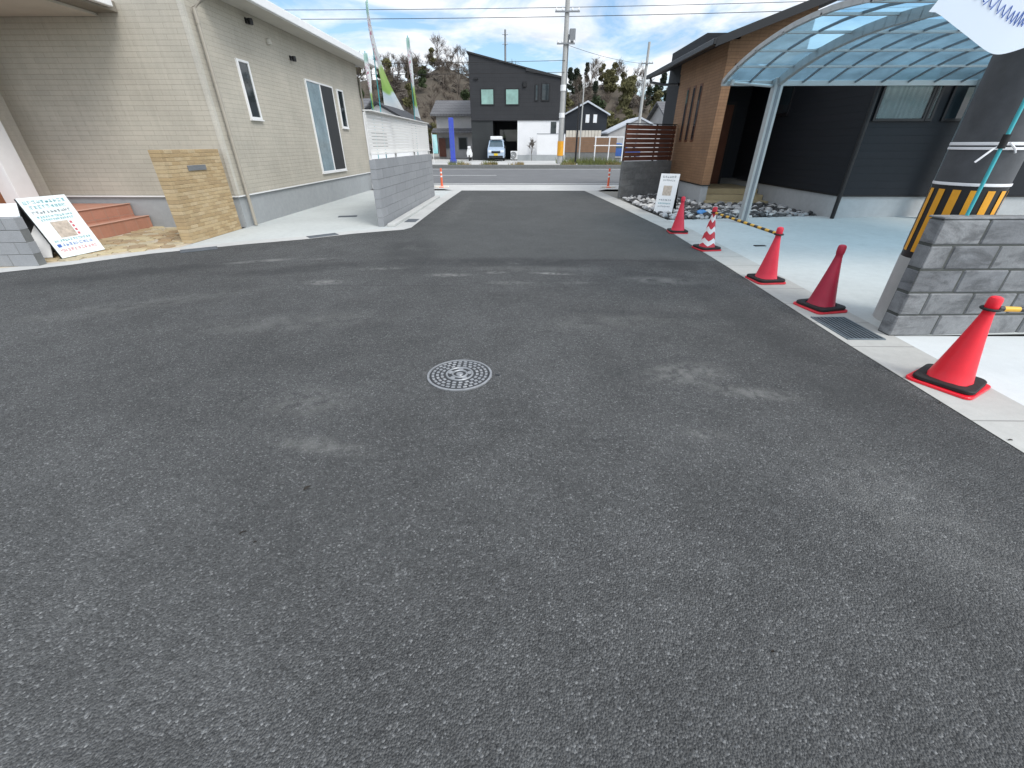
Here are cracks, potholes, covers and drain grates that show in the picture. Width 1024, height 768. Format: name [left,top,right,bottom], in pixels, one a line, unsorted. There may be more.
manhole cover [427,360,500,392]
drain grate [811,316,886,340]
